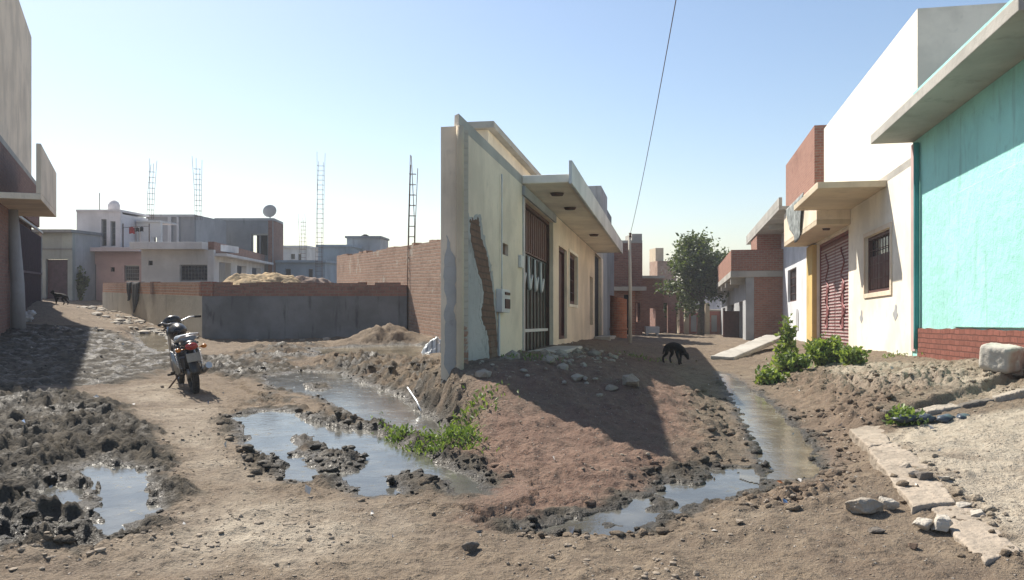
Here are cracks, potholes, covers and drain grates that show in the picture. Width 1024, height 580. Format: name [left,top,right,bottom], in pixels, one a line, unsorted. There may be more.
pothole [0,444,195,553]
pothole [211,364,518,503]
